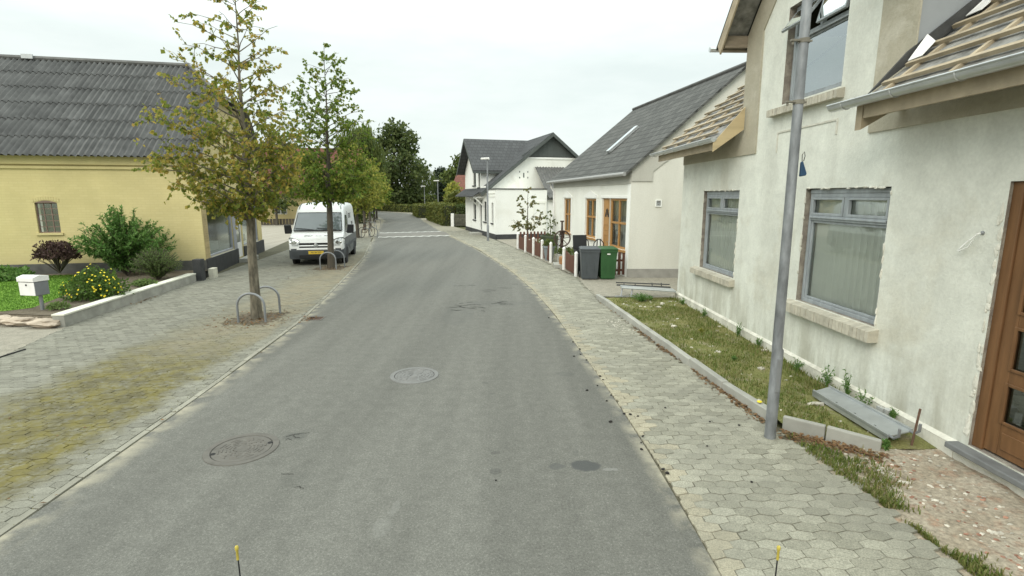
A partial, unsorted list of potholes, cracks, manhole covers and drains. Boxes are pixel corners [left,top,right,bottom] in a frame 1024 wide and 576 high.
manhole cover [390,367,439,384]
manhole cover [202,433,280,466]
